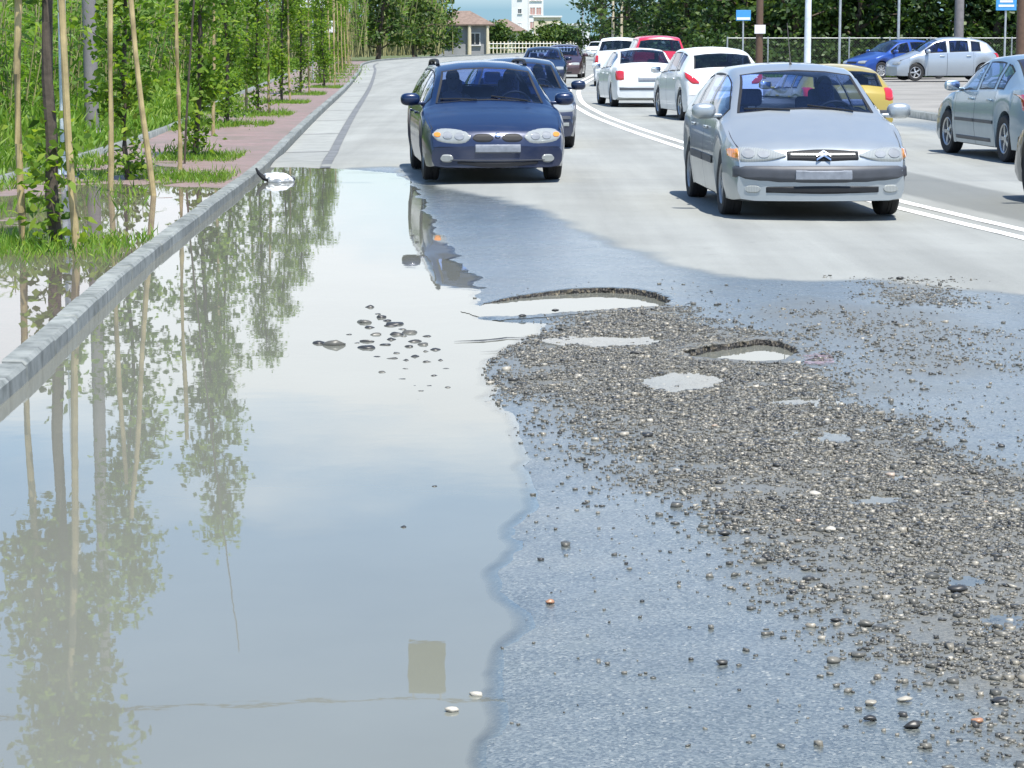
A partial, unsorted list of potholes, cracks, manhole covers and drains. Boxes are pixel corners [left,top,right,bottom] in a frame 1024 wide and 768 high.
pothole [461,293,665,317]
pothole [661,337,825,364]
